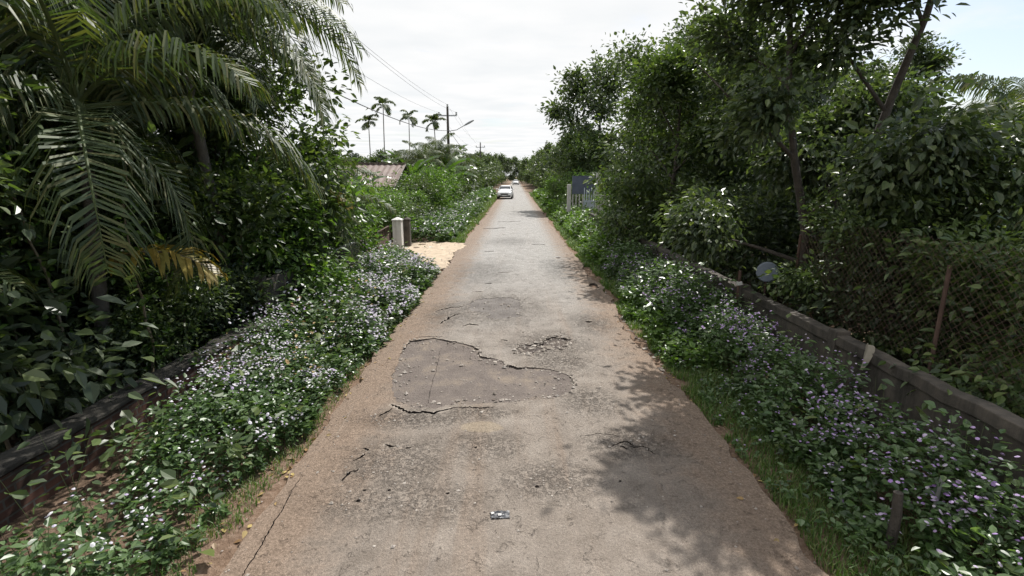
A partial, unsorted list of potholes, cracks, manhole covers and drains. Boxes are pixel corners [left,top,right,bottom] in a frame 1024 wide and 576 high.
pothole [390,337,578,409]
crack [342,444,411,481]
crack [585,433,655,454]
